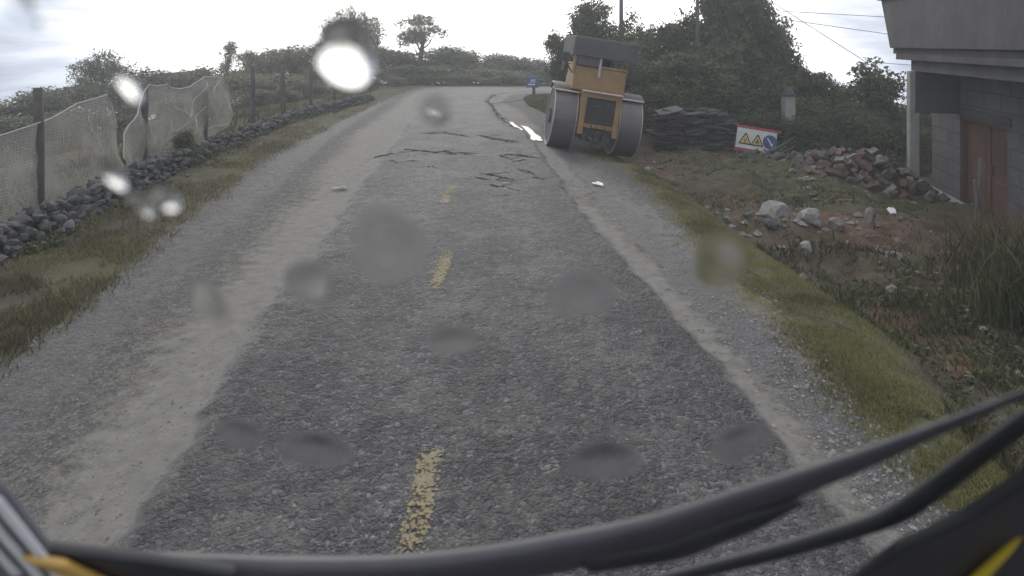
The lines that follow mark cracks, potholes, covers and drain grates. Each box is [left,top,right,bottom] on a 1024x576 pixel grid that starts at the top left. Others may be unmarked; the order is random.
crack [374,94,546,196]
